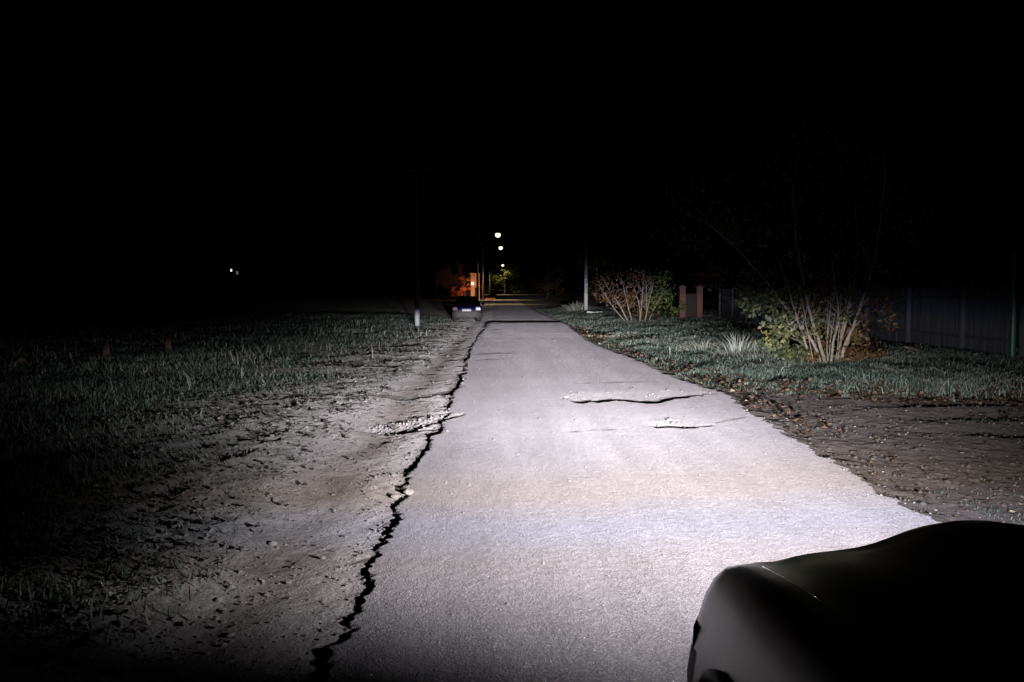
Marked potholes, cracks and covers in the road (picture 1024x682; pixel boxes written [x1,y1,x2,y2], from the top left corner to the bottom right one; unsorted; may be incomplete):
pothole [351,412,465,436]
crack [323,322,514,681]
pothole [651,418,712,429]
